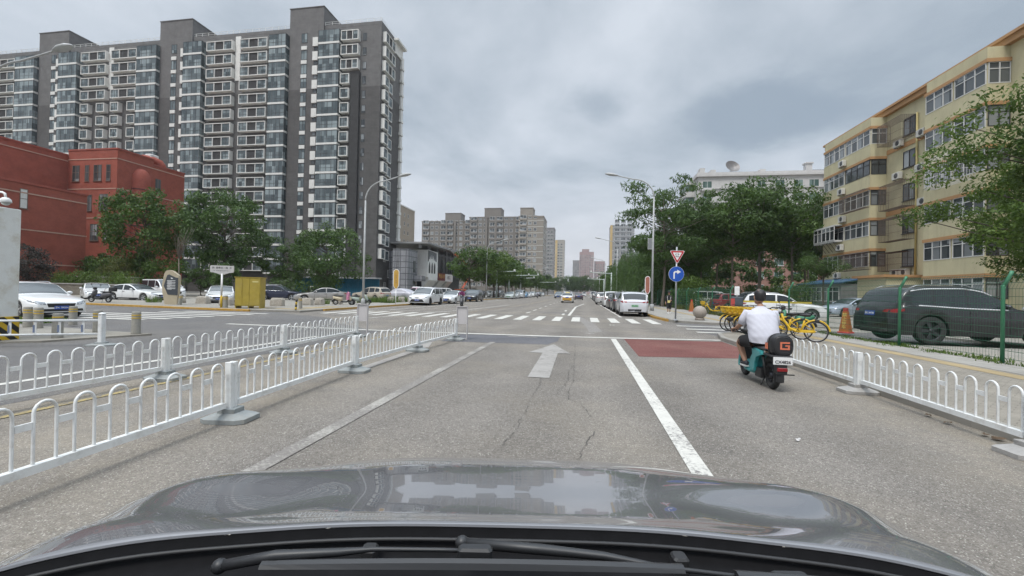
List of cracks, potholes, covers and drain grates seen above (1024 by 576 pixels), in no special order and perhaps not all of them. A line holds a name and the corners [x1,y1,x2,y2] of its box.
crack [559,352,594,458]
